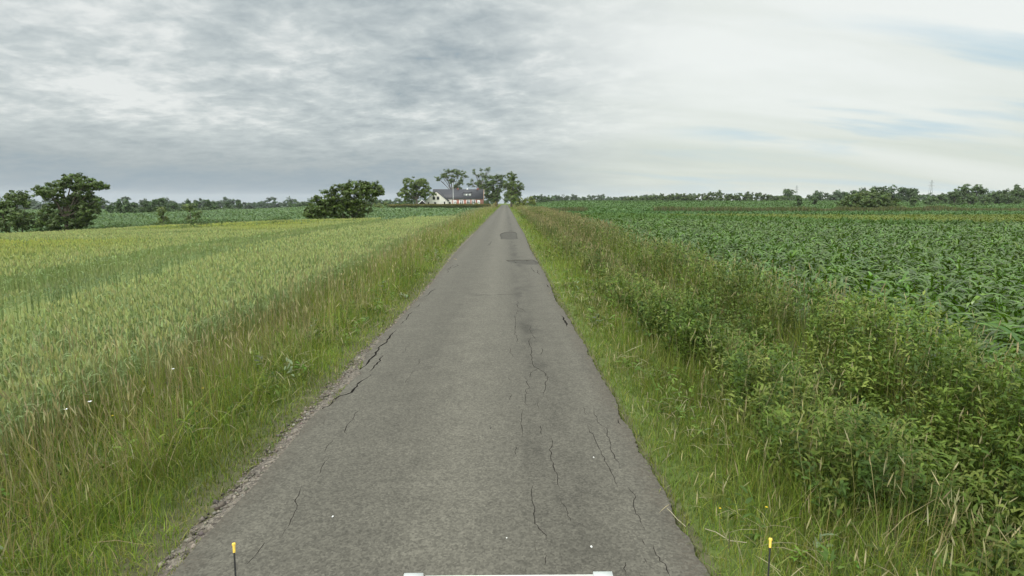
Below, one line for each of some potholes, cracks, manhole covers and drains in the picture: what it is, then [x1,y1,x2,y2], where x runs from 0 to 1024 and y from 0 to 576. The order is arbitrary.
crack [584,409,670,575]
crack [531,486,547,563]
crack [320,290,433,472]
